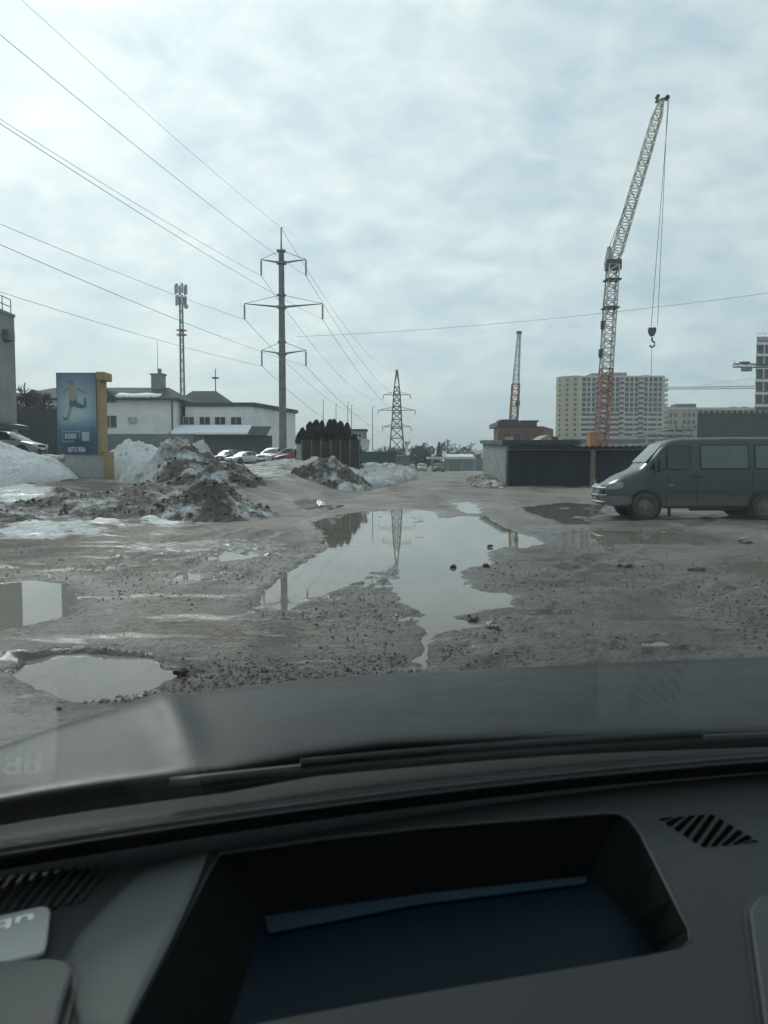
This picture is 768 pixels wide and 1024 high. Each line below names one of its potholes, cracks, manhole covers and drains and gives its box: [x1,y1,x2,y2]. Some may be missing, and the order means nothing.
pothole [0,575,101,634]
pothole [450,501,486,514]
pothole [0,645,185,706]
pothole [239,509,554,672]
